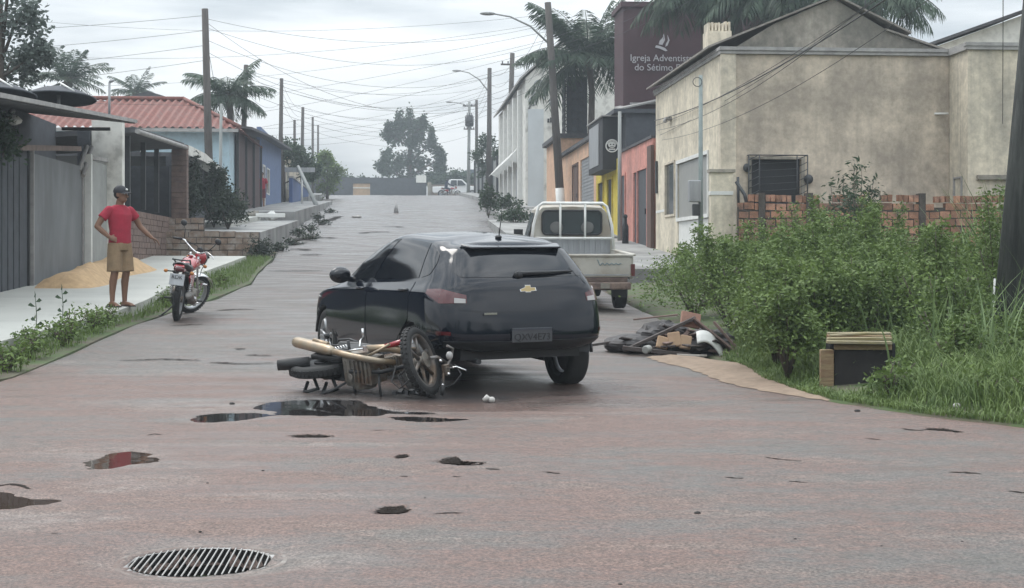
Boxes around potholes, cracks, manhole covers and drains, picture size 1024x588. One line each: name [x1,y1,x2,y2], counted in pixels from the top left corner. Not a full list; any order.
pothole [374,505,412,514]
pothole [83,452,160,469]
pothole [191,413,281,423]
pothole [253,399,436,416]
pothole [439,456,487,465]
drain grate [113,545,287,580]
pothole [0,492,61,510]
